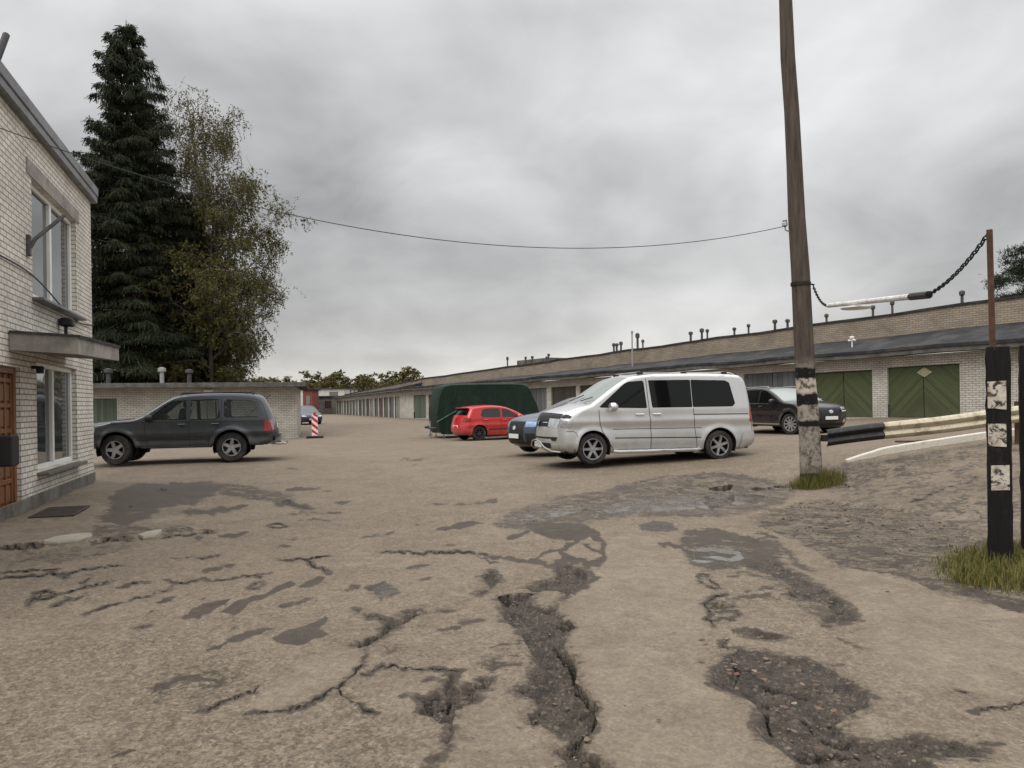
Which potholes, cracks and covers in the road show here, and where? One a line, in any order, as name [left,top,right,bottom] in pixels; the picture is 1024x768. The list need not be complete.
crack [282,555,329,572]
pothole [747,560,859,625]
crack [198,656,459,715]
pothole [706,601,738,610]
pothole [471,565,615,768]
pothole [707,648,987,768]
crack [382,550,494,559]
pothole [407,672,497,768]
crack [0,565,263,614]
crack [957,690,1024,711]
